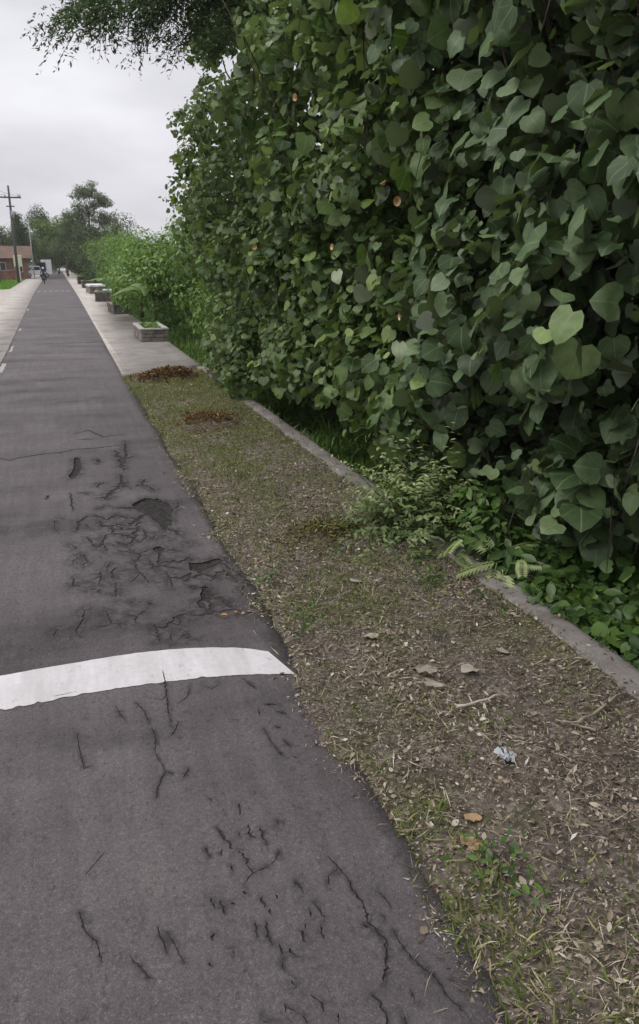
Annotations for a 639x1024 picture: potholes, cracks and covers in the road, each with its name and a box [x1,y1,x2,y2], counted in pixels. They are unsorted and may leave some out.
crack [205,798,467,1024]
pothole [200,586,215,602]
crack [130,927,184,979]
pothole [189,559,223,572]
pothole [68,458,82,479]
crack [0,430,268,642]
pothole [132,498,173,531]
crack [116,673,219,799]
crack [79,912,102,962]
